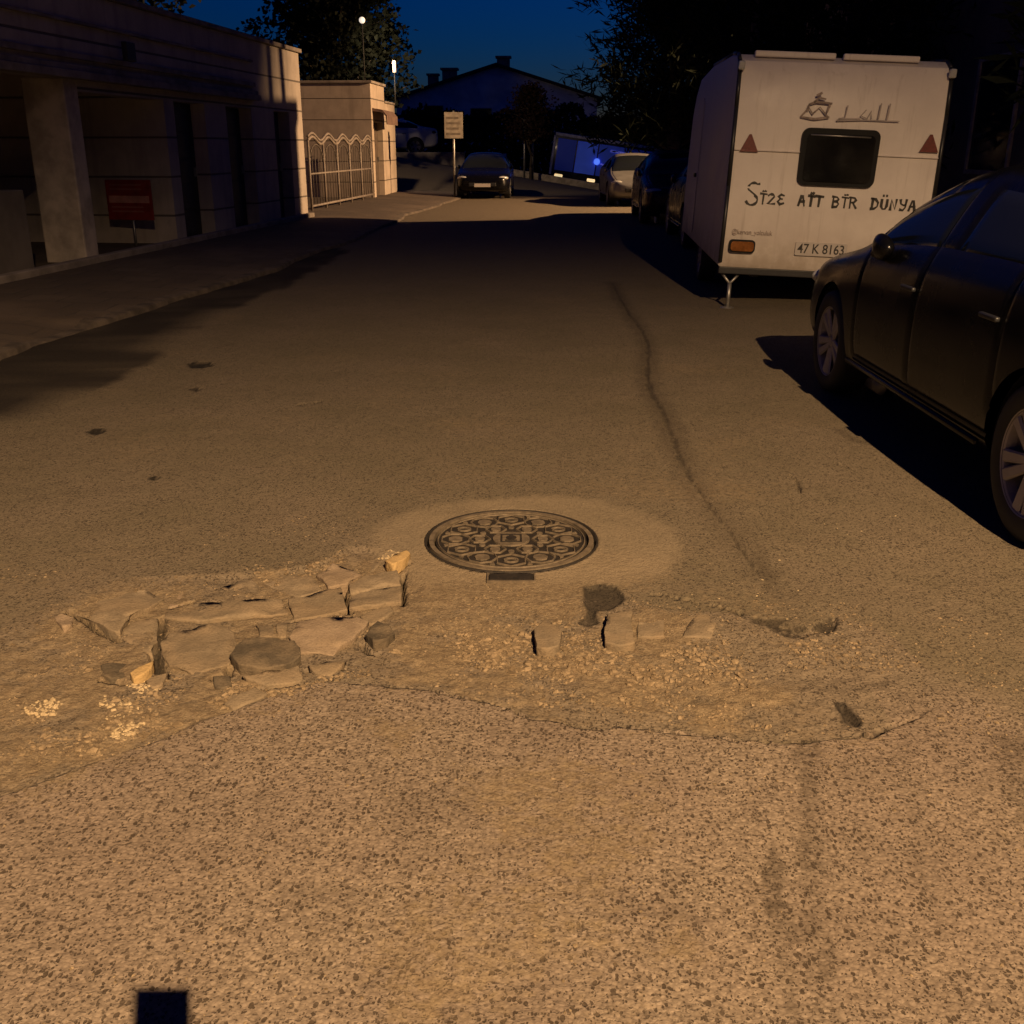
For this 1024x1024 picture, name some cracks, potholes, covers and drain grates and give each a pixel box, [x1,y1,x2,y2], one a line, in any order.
pothole [391,577,943,741]
crack [610,281,762,574]
manhole cover [424,509,598,584]
crack [849,717,921,740]
crack [347,683,807,744]
pothole [0,546,415,798]
